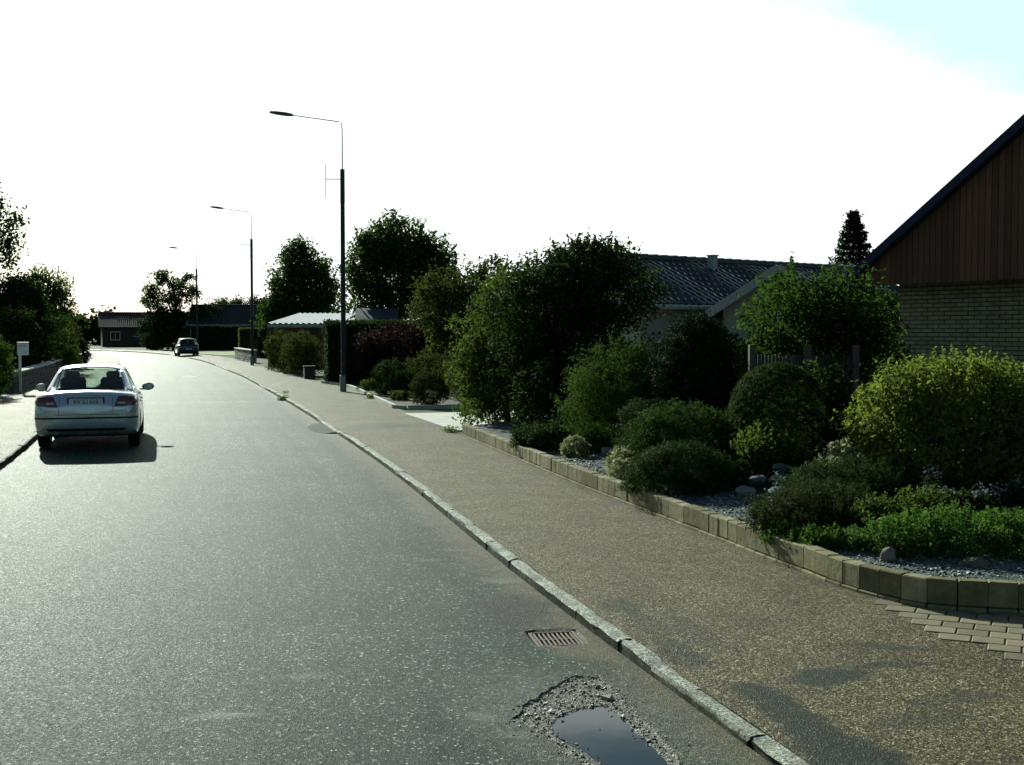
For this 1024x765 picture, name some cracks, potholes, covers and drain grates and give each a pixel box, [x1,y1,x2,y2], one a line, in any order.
pothole [504,672,690,765]
drain grate [525,628,590,646]
